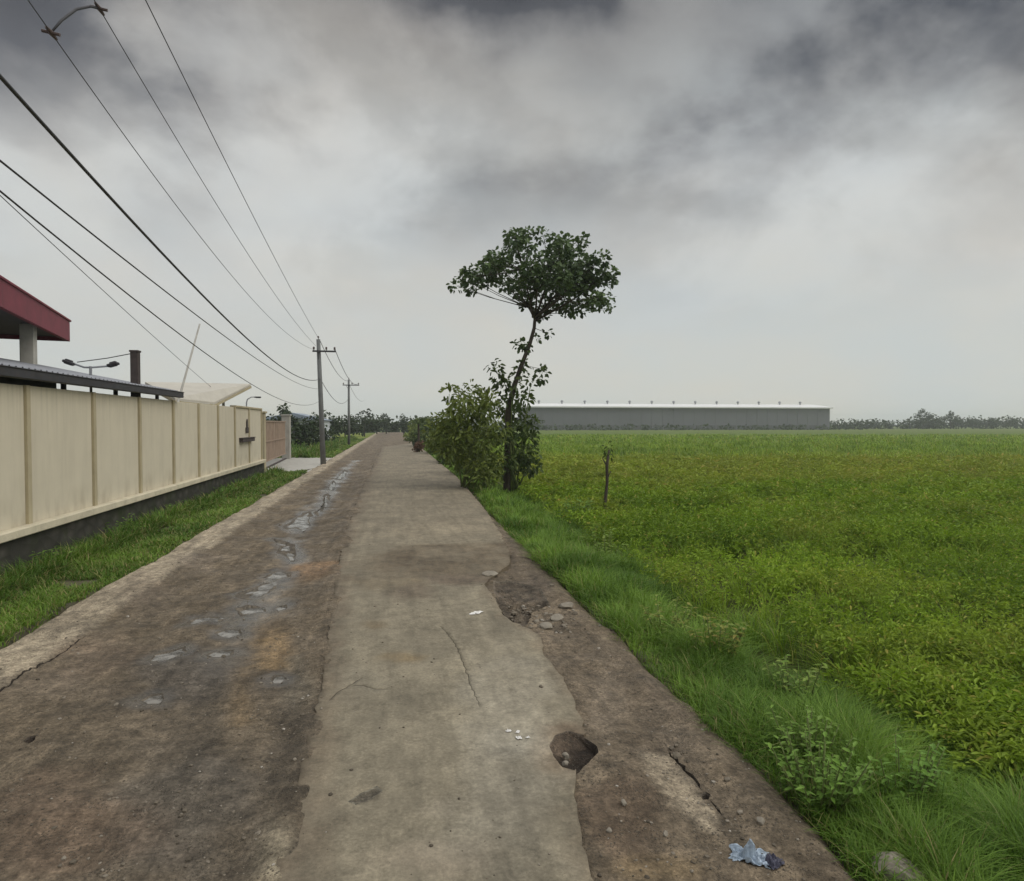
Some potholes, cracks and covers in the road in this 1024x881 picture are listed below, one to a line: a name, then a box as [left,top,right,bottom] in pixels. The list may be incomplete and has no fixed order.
pothole [282,511,313,532]
crack [0,637,84,692]
pothole [140,693,165,704]
pothole [273,538,297,562]
pothole [235,582,277,600]
pothole [493,580,550,626]
pothole [214,629,242,638]
pothole [185,616,224,624]
pothole [549,731,598,774]
pothole [151,646,188,662]
pothole [235,604,266,617]
